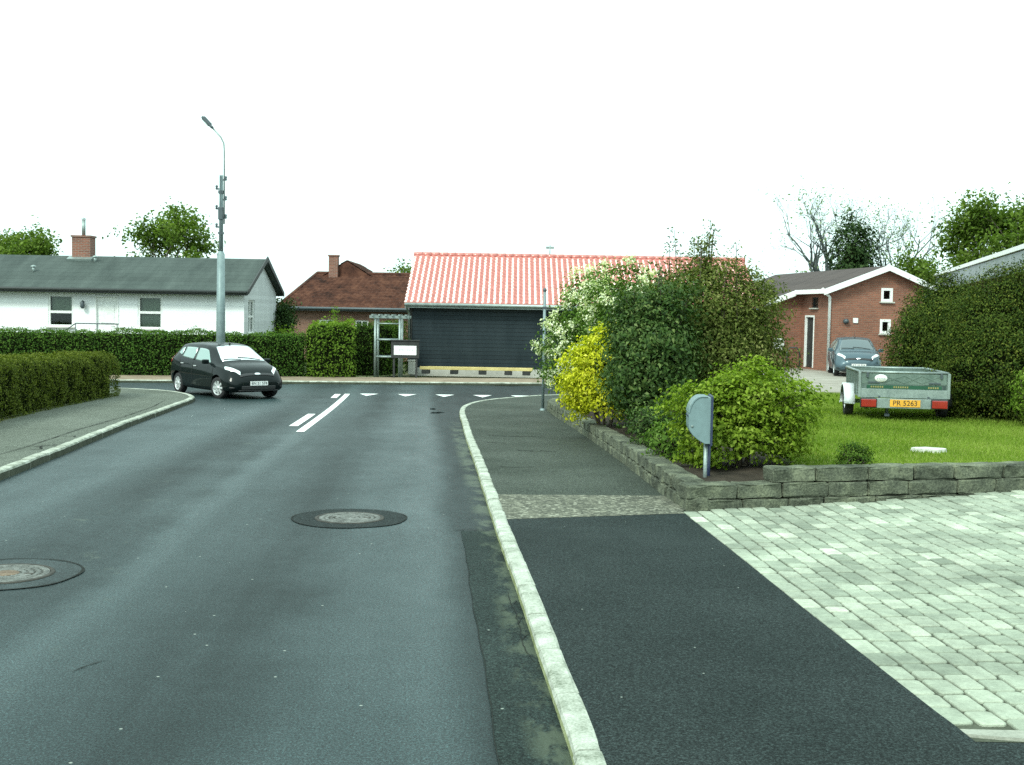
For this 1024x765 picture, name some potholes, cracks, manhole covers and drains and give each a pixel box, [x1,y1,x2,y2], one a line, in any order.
manhole cover [291,509,407,528]
crack [505,592,534,661]
manhole cover [0,558,85,590]
